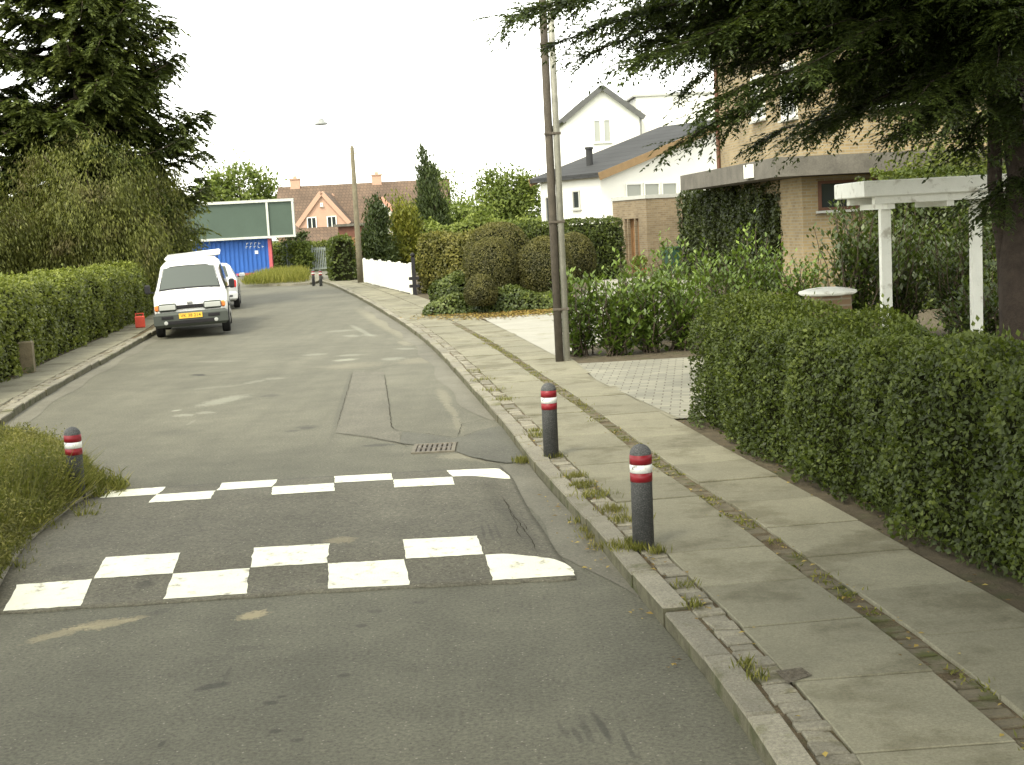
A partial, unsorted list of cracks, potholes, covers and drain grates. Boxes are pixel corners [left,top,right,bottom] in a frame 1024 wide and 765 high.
crack [506,502,537,551]
